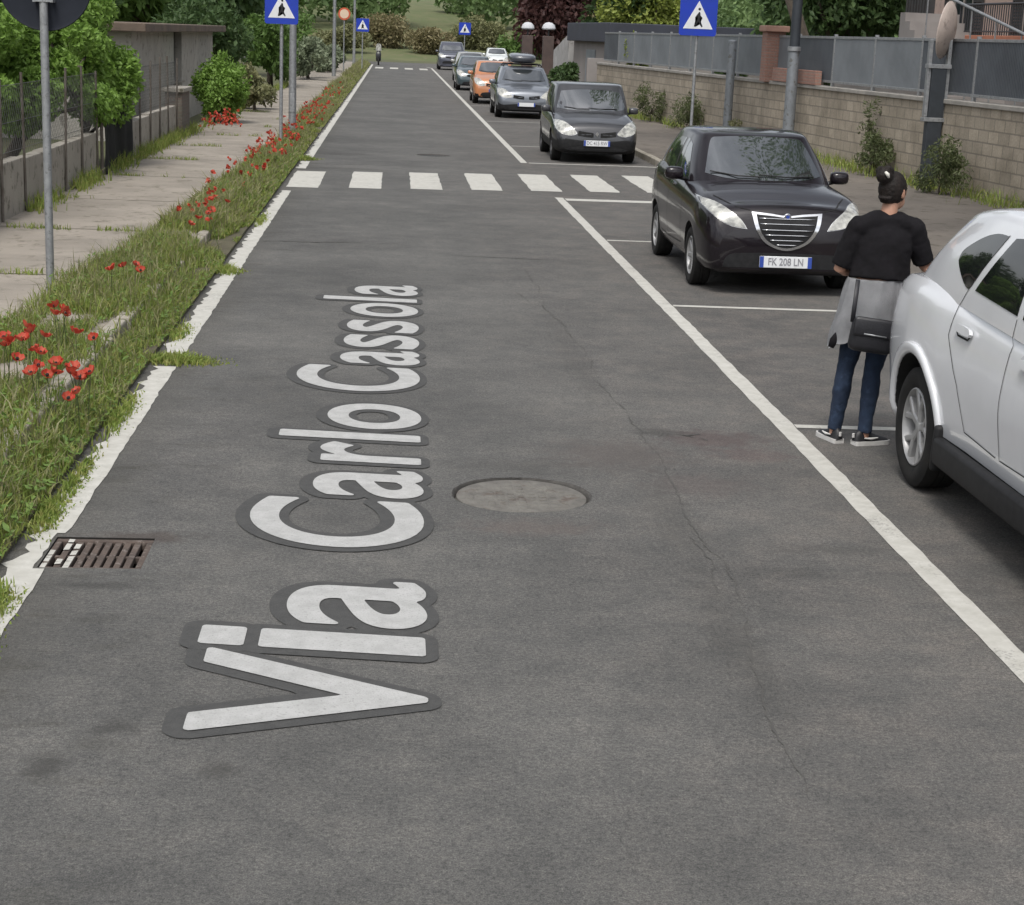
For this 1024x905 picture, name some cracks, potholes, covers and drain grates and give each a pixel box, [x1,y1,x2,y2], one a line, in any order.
manhole cover [452,477,592,513]
crack [516,269,808,791]
drain grate [37,537,155,569]
